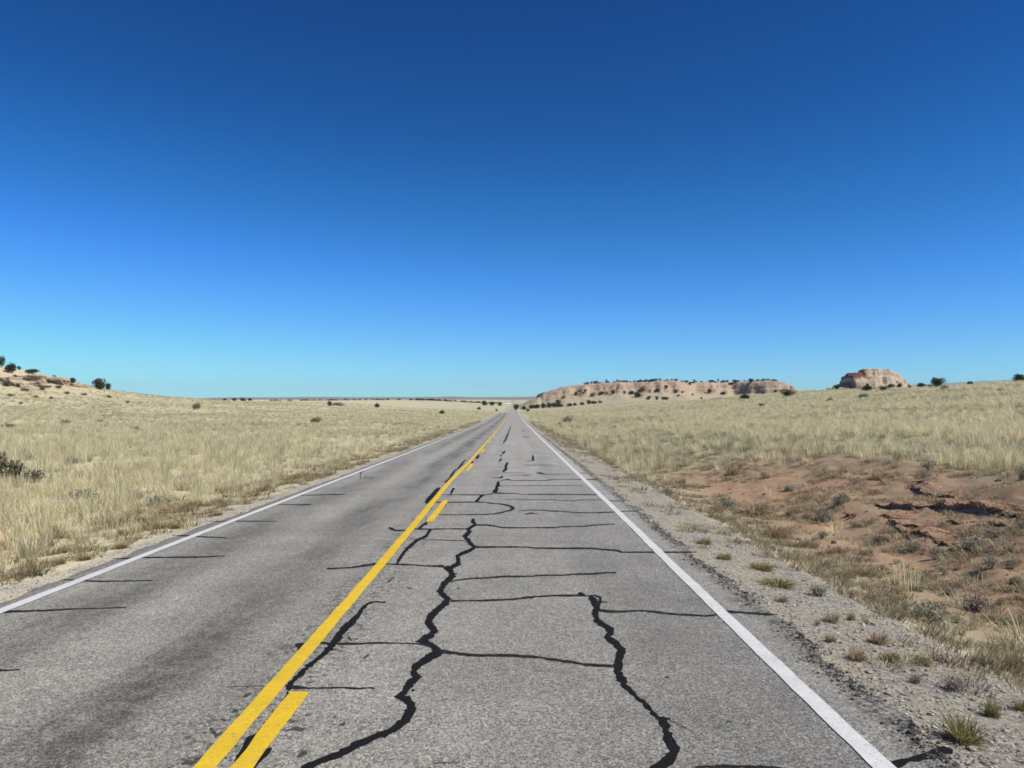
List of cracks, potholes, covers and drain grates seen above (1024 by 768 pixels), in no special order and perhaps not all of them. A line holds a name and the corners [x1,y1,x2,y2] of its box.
crack [500,472,626,501]
